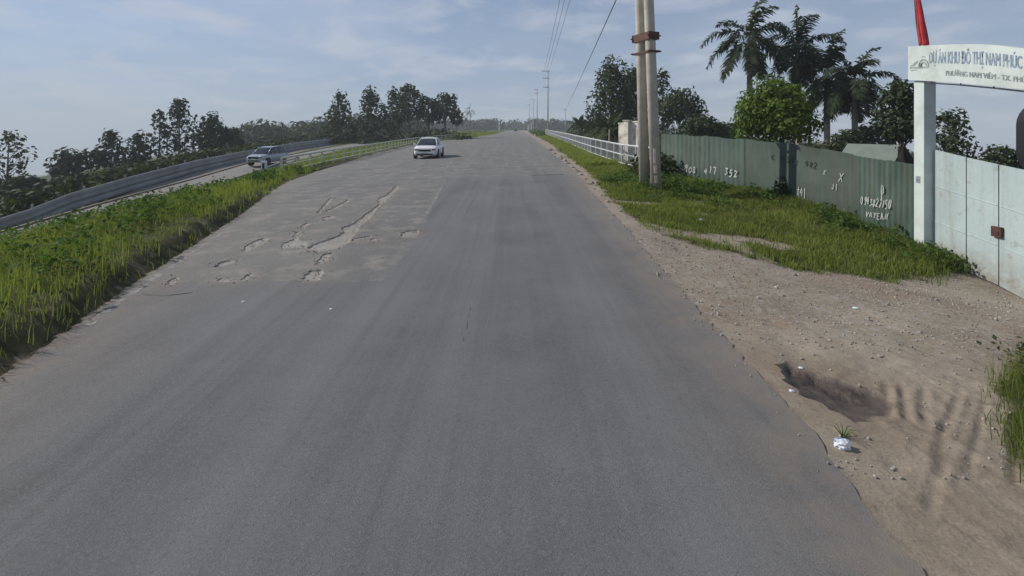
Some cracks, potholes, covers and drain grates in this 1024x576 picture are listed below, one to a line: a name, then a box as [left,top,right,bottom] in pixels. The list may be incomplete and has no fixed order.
pothole [301,270,324,281]
pothole [308,186,398,253]
pothole [241,238,268,252]
pothole [281,232,309,249]
